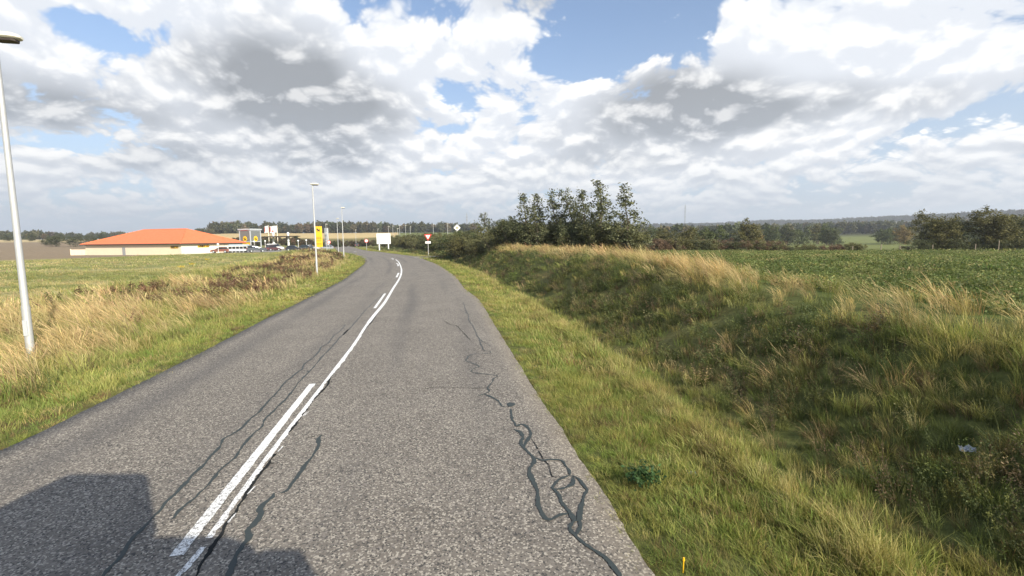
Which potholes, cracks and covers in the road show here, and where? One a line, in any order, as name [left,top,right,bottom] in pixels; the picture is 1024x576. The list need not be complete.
crack [196,316,376,576]
